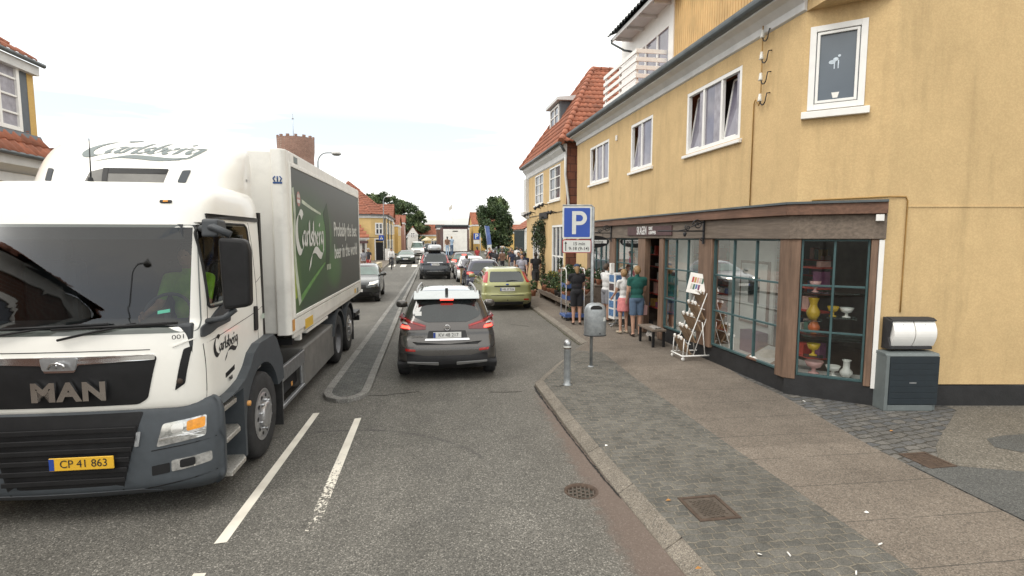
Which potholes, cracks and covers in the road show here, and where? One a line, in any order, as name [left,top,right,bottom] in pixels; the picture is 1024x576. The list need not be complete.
manhole cover [899,452,958,469]
manhole cover [677,494,742,522]
drain grate [564,483,599,499]
